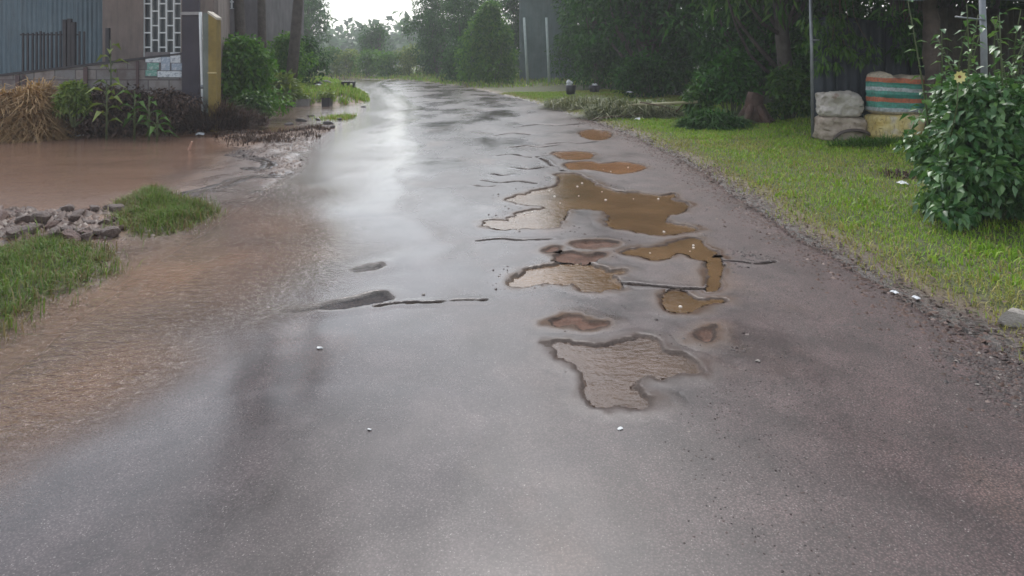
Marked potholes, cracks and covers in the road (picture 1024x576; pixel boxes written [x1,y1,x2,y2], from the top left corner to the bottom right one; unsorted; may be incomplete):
crack [358,294,502,313]
pothole [524,242,571,257]
pothole [519,305,634,335]
pothole [522,325,741,427]
pothole [632,282,755,322]
pothole [682,254,748,295]
pothole [531,249,622,265]
pothole [571,129,620,141]
pothole [464,171,719,239]
pothole [556,160,657,176]
pothole [610,235,736,266]
